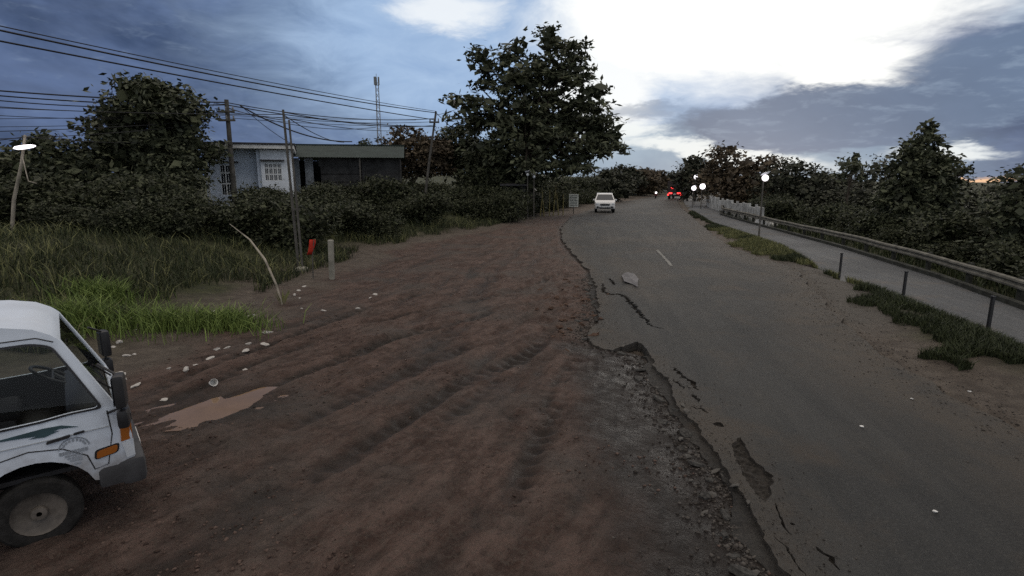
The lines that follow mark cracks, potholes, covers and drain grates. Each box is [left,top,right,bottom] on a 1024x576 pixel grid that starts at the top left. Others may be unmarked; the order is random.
crack [673,367,701,409]
pothole [732,438,774,502]
crack [601,278,647,321]
